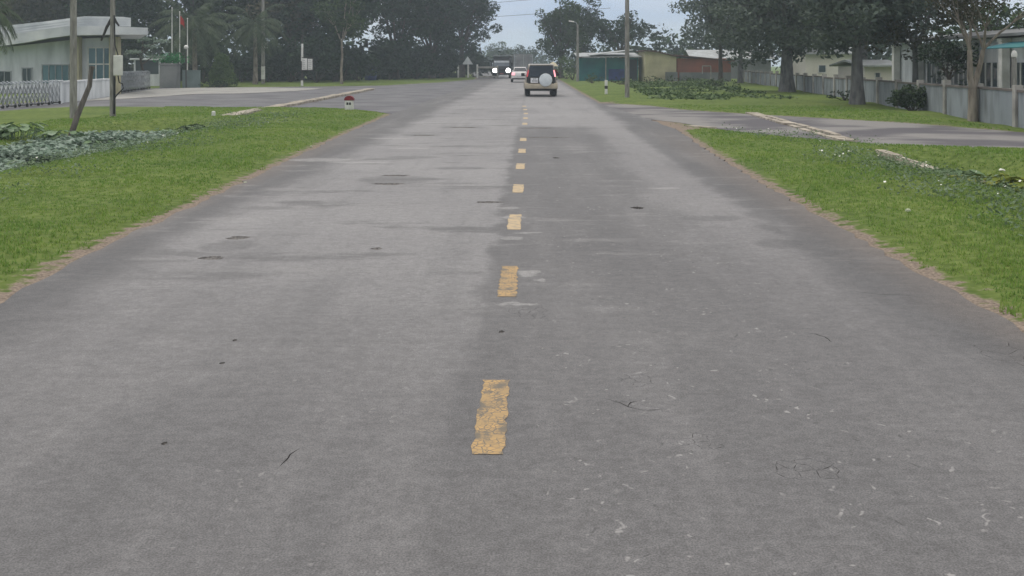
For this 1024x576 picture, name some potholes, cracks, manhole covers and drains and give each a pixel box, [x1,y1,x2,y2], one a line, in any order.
crack [775,458,840,479]
crack [608,374,660,410]
